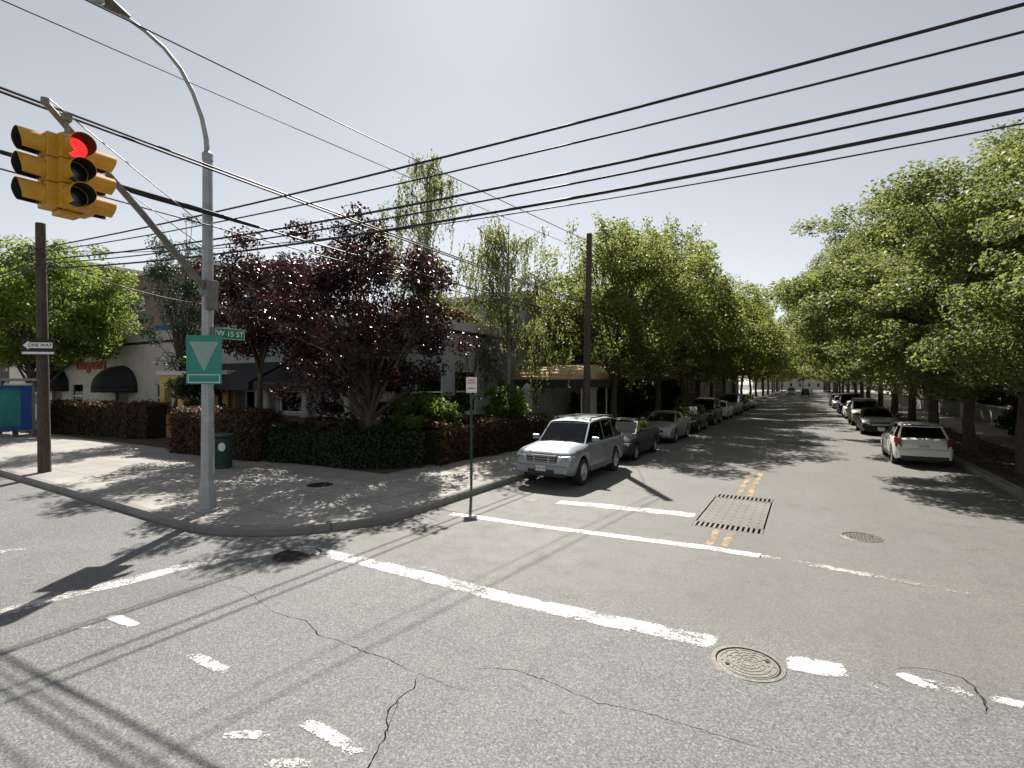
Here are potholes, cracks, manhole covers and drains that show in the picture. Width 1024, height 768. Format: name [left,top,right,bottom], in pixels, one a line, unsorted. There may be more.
manhole cover [711,645,787,683]
crack [476,667,787,755]
manhole cover [272,547,322,563]
crack [899,667,989,714]
manhole cover [840,532,884,543]
